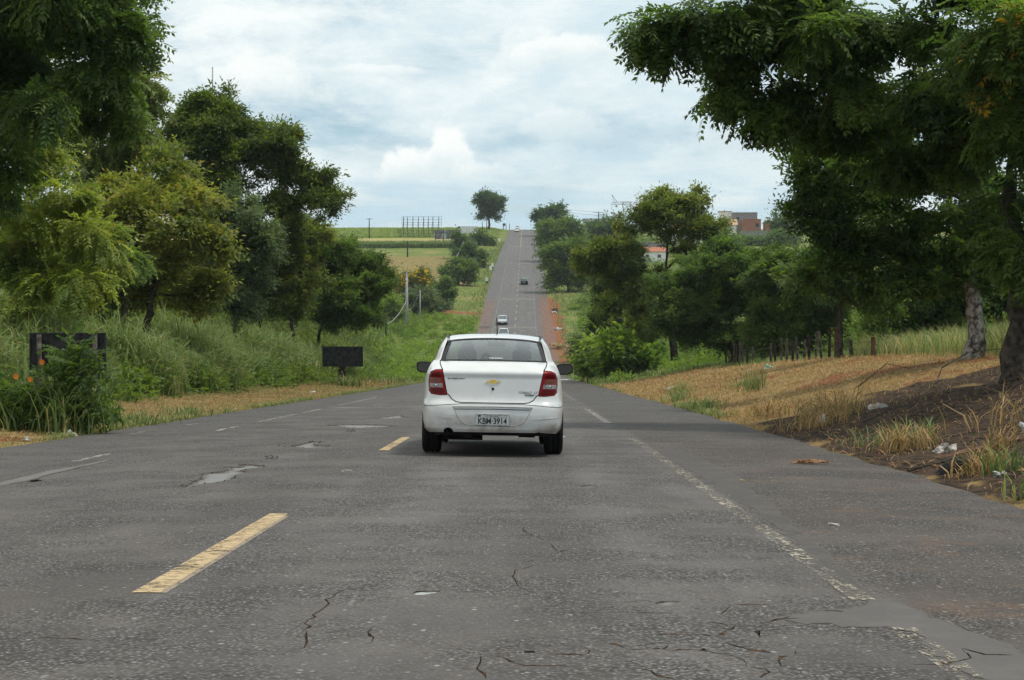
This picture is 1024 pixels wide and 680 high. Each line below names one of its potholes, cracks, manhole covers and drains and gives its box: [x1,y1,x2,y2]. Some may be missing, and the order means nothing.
crack [916,649,986,665]
pothole [278,440,334,448]
crack [609,604,796,678]
pothole [181,464,267,488]
crack [298,589,347,650]
